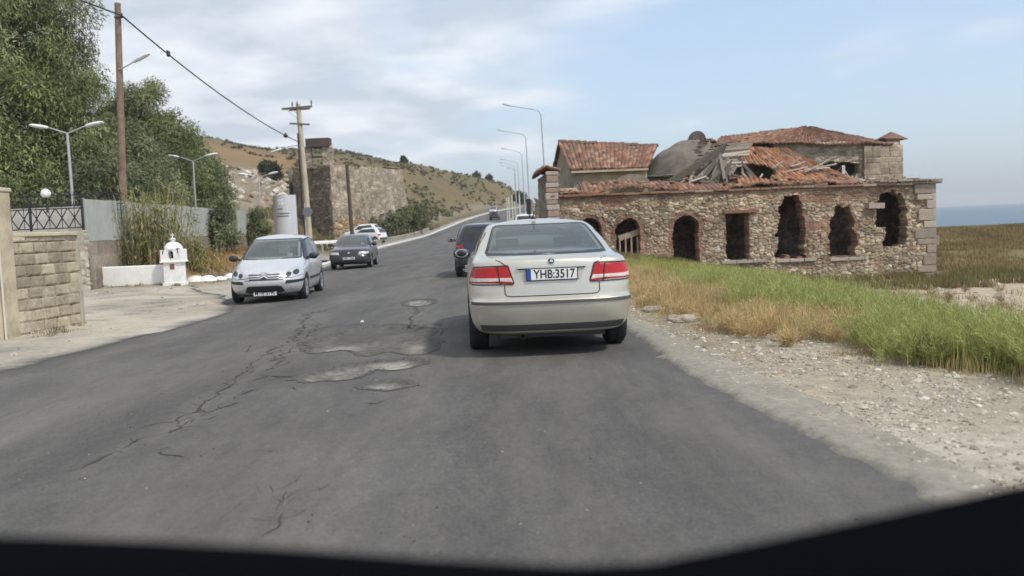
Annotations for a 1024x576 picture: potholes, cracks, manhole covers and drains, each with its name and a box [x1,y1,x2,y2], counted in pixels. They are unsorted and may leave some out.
crack [407,307,443,334]
crack [44,311,388,475]
crack [219,475,326,535]
